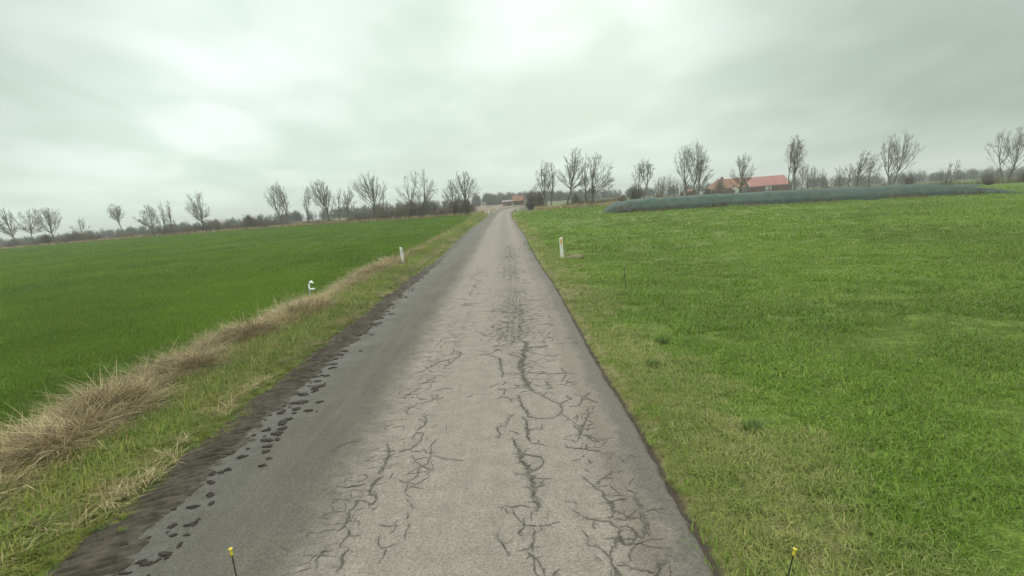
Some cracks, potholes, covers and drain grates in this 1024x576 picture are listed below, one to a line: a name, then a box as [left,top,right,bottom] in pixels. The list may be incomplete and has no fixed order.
crack [282,246,672,576]
